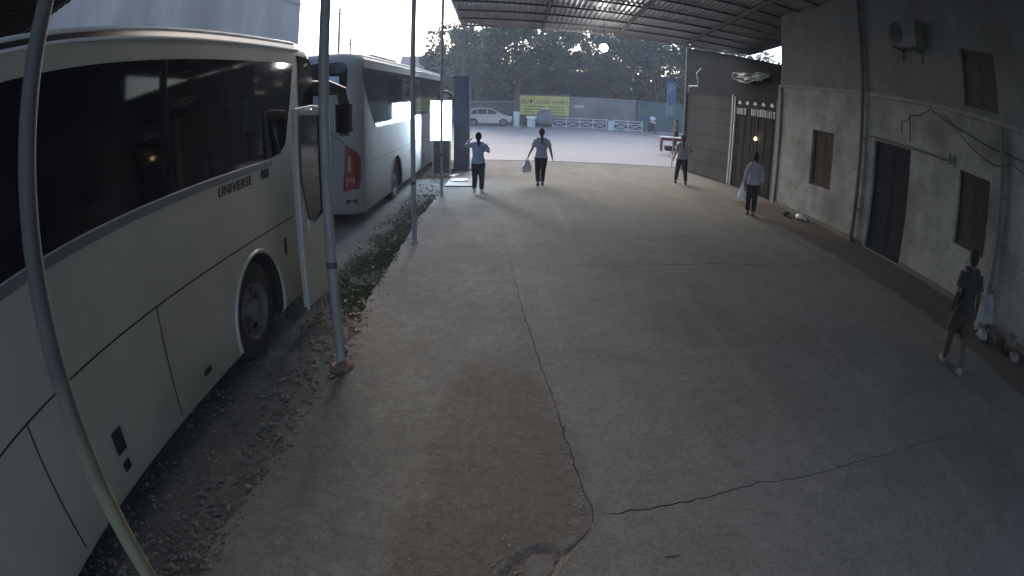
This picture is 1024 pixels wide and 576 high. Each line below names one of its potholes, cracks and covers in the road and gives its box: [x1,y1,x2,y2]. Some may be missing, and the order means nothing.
pothole [498,525,593,576]
crack [506,242,961,522]
